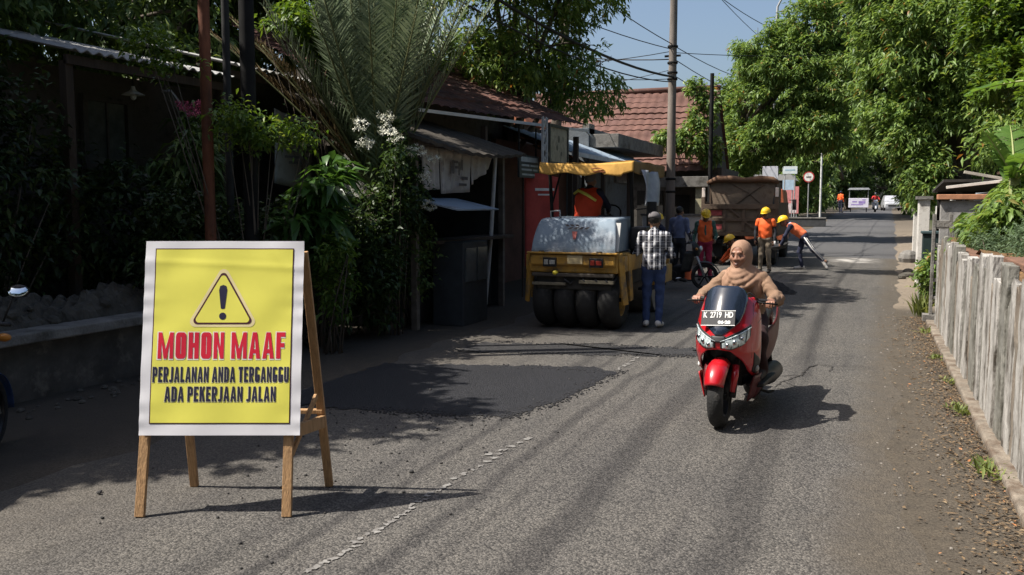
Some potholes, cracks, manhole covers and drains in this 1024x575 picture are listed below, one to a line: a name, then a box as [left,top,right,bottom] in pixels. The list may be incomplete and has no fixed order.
crack [775,364,865,387]
